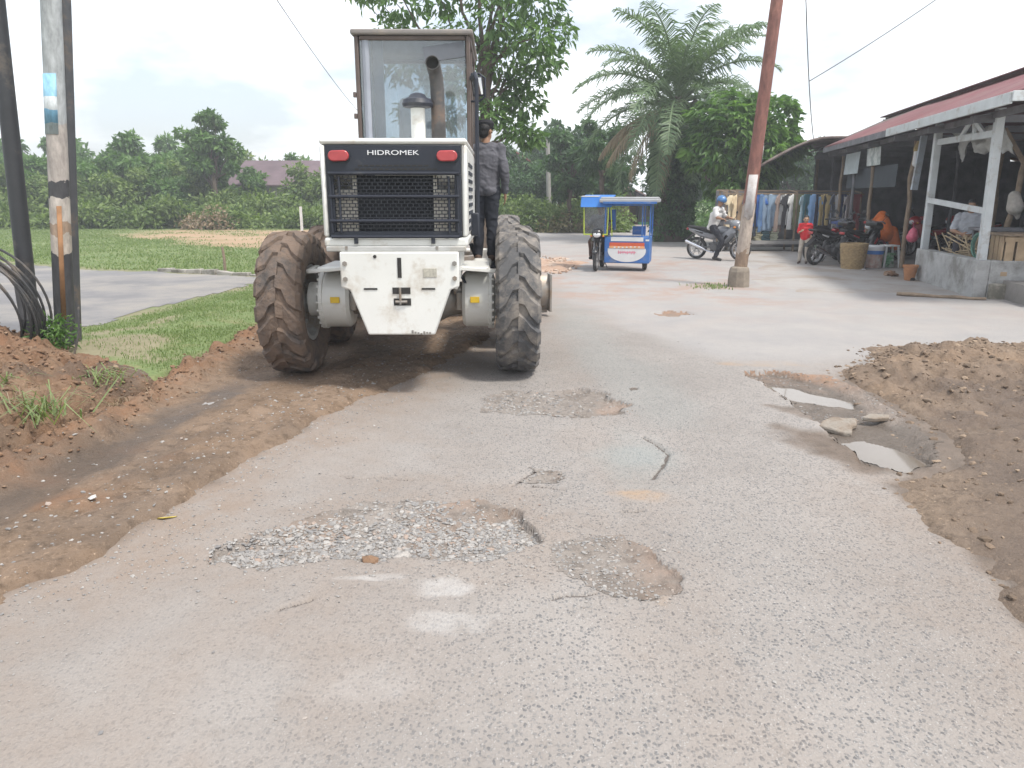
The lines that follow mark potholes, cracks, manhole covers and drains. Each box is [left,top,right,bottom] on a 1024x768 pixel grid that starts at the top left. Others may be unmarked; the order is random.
pothole [520,467,565,484]
pothole [480,388,632,418]
crack [643,438,669,480]
pothole [549,534,683,601]
pothole [744,369,944,473]
pothole [191,498,543,572]
